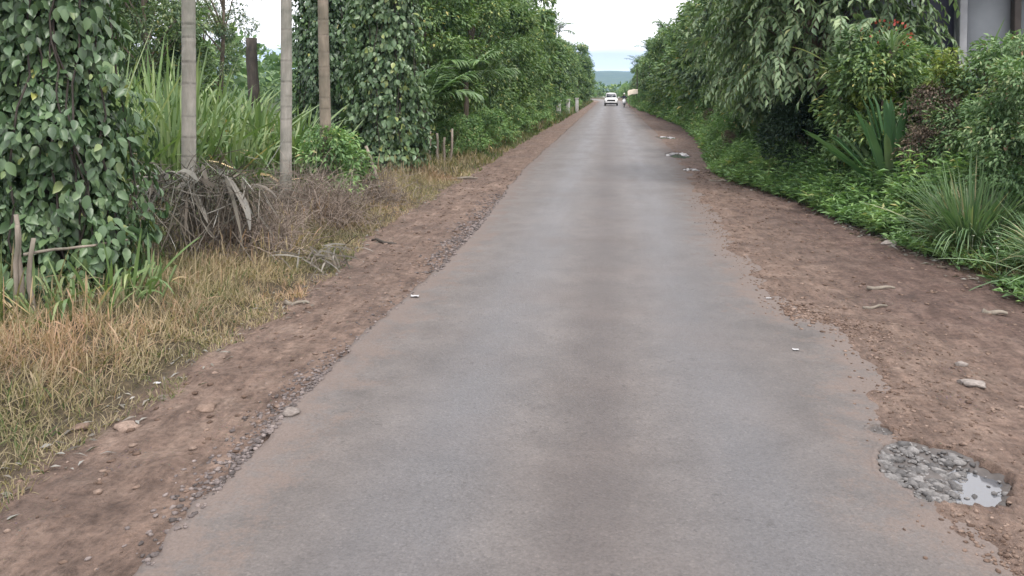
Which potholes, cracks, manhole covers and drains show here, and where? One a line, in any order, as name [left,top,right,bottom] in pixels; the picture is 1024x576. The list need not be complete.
pothole [870,436,1024,513]
